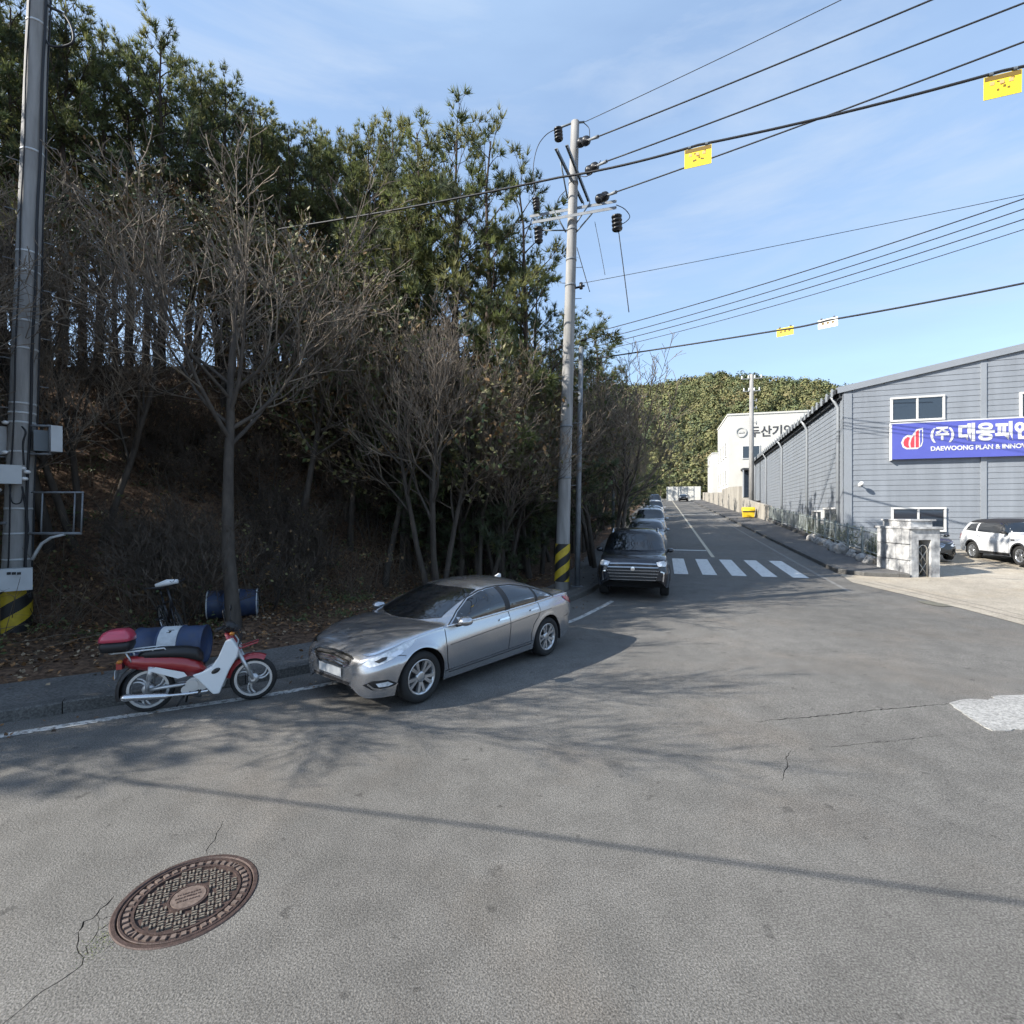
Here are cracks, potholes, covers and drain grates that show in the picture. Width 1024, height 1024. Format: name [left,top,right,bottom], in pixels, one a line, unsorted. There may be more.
crack [762,703,949,722]
manhole cover [109,854,259,950]
crack [3,896,115,1024]
